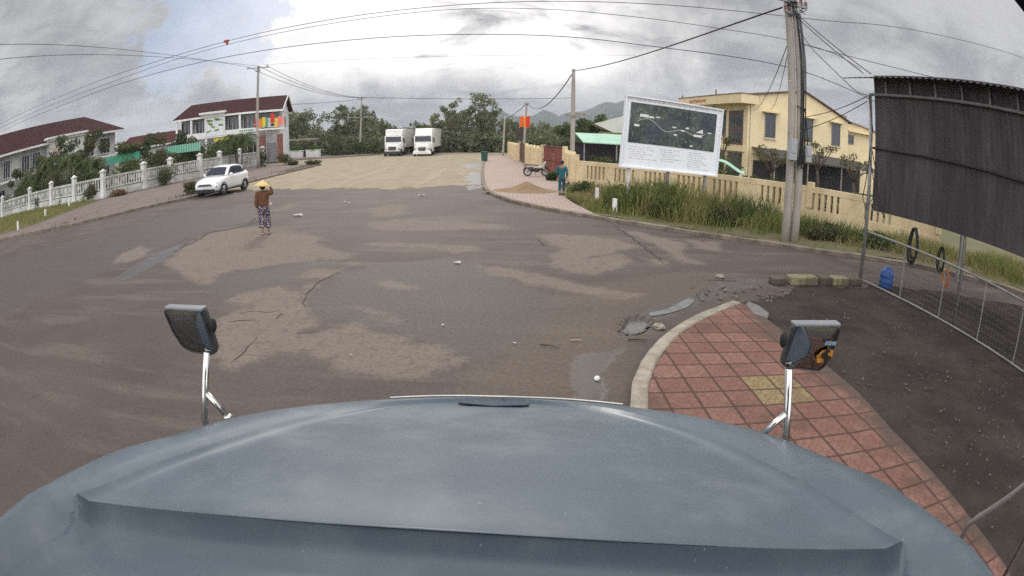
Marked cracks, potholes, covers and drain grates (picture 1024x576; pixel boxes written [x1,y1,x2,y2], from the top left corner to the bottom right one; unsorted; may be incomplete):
pothole [617,312,654,337]
